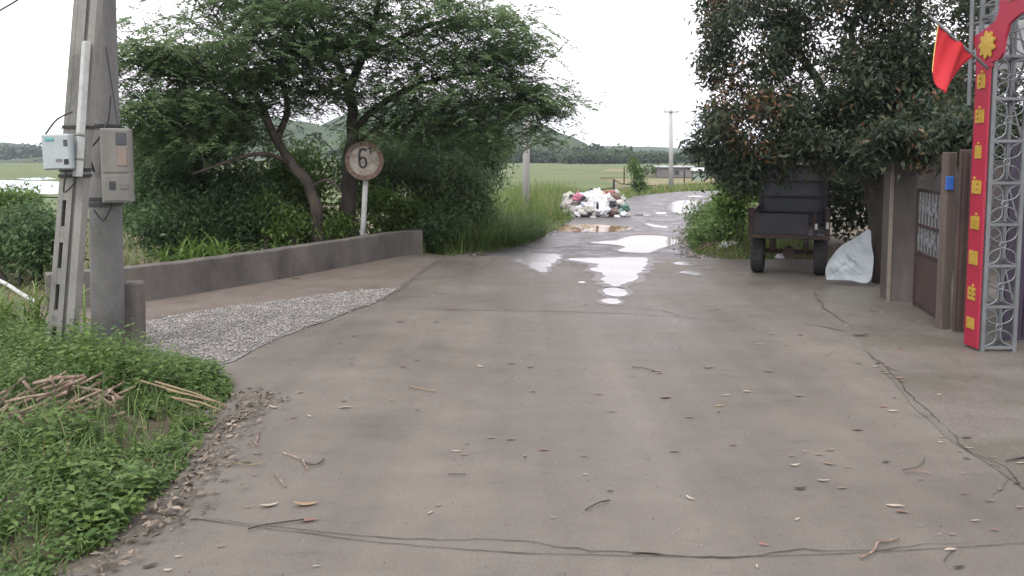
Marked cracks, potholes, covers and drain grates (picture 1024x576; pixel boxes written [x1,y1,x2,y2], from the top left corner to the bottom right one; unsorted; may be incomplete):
crack [860,348,1024,495]
crack [805,291,845,331]
crack [205,517,969,558]
